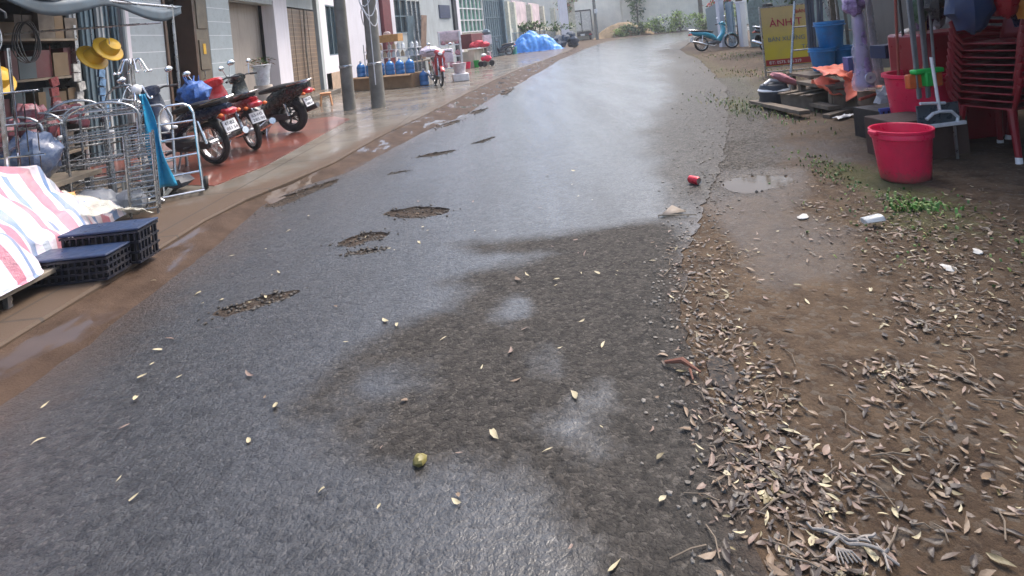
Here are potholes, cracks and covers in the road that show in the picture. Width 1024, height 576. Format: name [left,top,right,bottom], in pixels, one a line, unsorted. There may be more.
pothole [320,228,399,250]
pothole [198,287,308,325]
pothole [411,150,456,158]
pothole [339,246,388,257]
pothole [383,204,461,220]
pothole [254,178,343,214]
